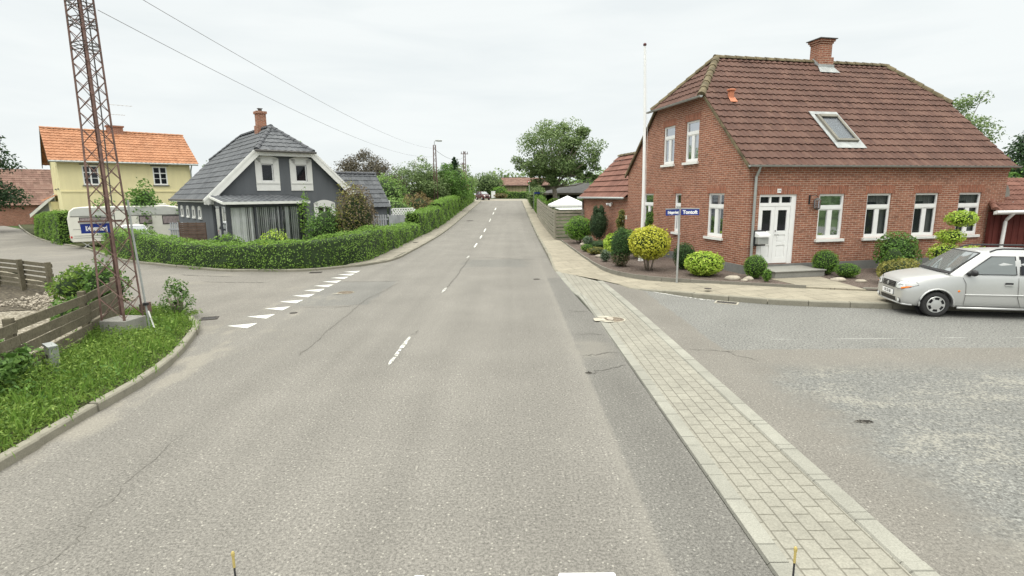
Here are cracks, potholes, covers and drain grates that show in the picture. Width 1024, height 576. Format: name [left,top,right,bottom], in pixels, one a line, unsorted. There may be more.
crack [25,433,185,576]
crack [300,281,398,355]
